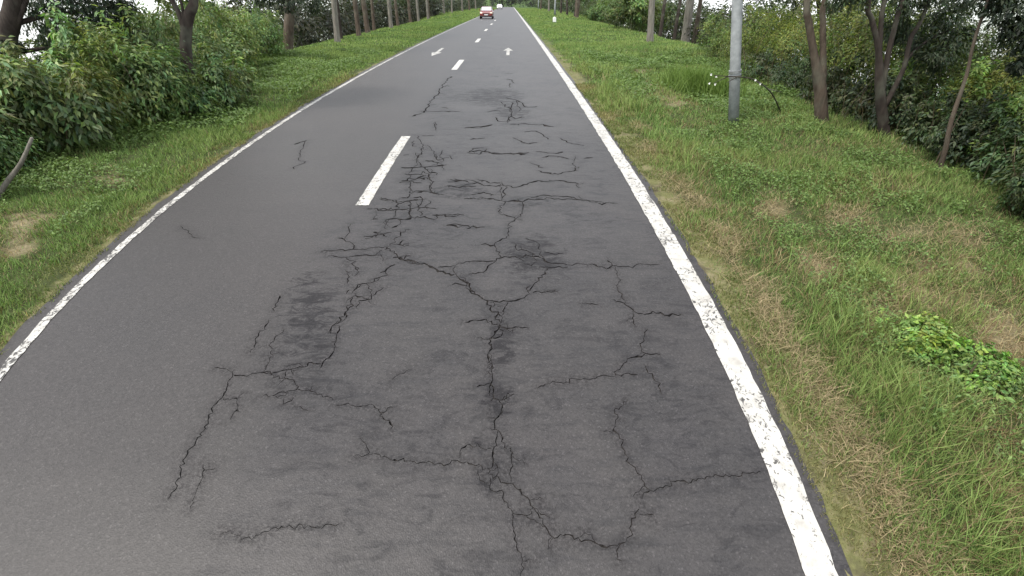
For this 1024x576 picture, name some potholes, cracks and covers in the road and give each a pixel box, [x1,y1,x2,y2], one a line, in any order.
crack [168,73,760,576]
